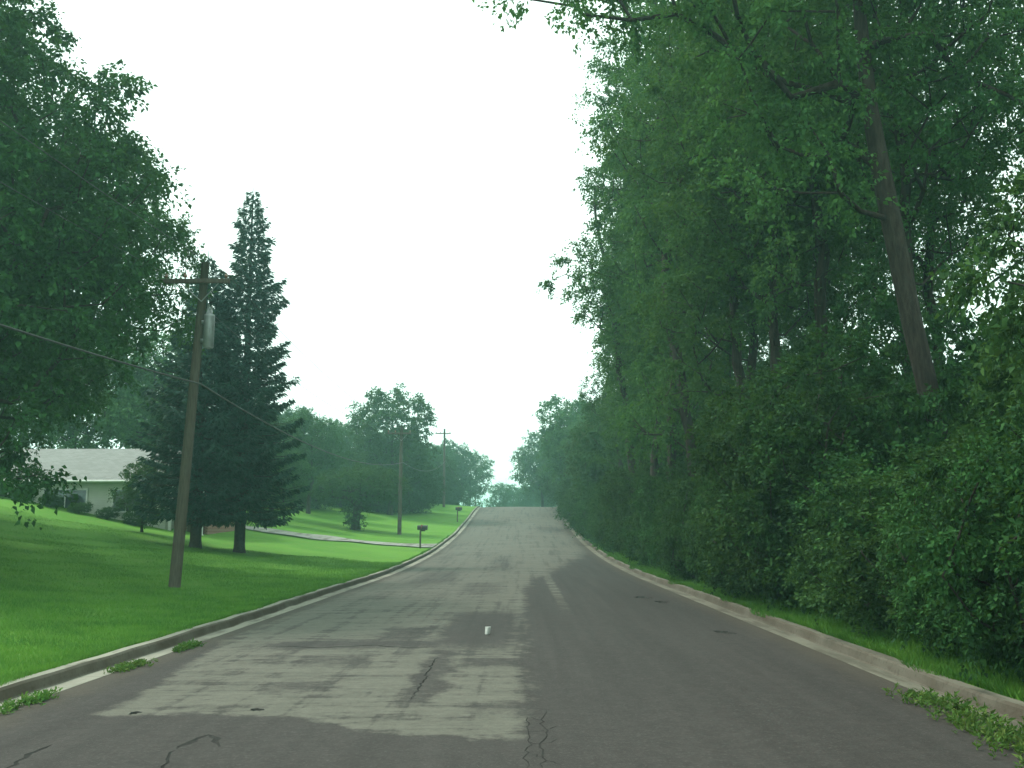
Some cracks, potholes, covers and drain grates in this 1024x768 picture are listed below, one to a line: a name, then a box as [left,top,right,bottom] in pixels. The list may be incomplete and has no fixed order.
crack [161,734,221,768]
crack [6,744,53,768]
crack [275,645,437,701]
crack [523,711,558,767]
